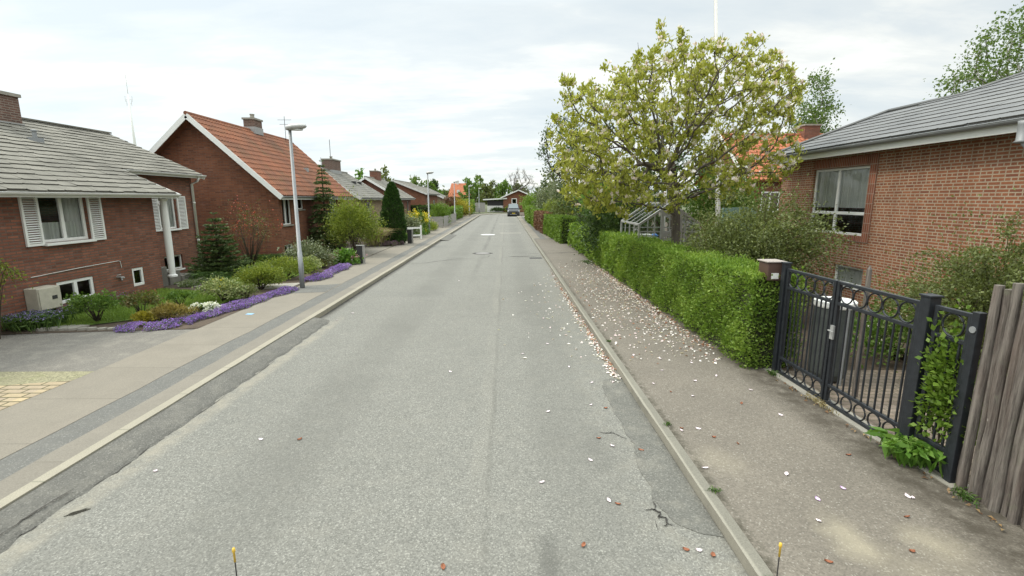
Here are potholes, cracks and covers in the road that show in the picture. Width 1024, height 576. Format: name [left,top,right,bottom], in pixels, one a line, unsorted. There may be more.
crack [646,501,672,529]
